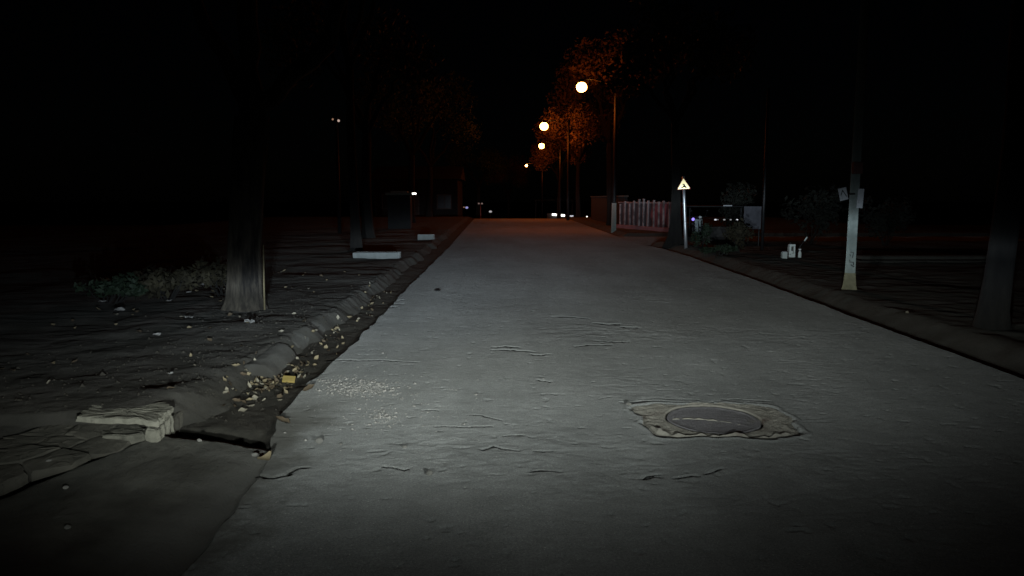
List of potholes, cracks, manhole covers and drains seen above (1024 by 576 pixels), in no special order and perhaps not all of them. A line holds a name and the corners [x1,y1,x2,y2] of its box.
crack [560,317,631,347]
manhole cover [631,402,801,440]
